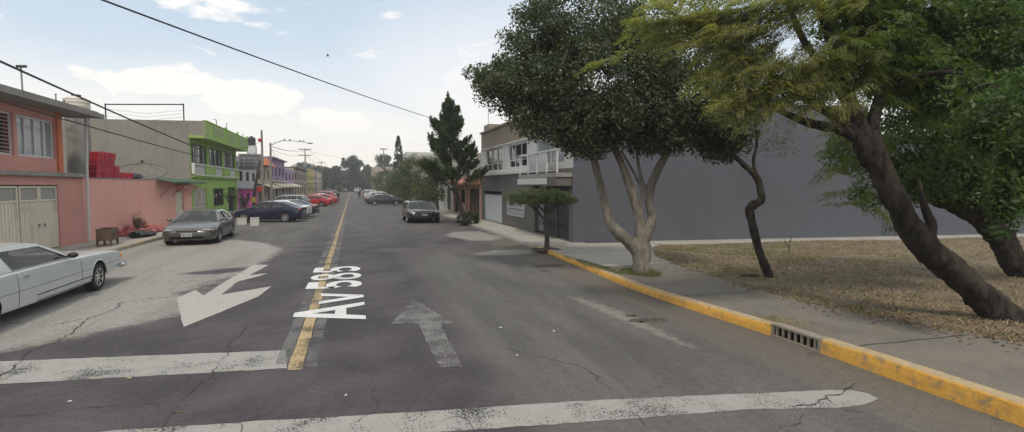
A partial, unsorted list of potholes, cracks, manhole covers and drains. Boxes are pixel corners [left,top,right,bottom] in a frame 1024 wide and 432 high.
crack [0,270,241,376]
crack [792,383,854,425]
crack [1,327,246,432]
drain grate [770,322,829,353]
